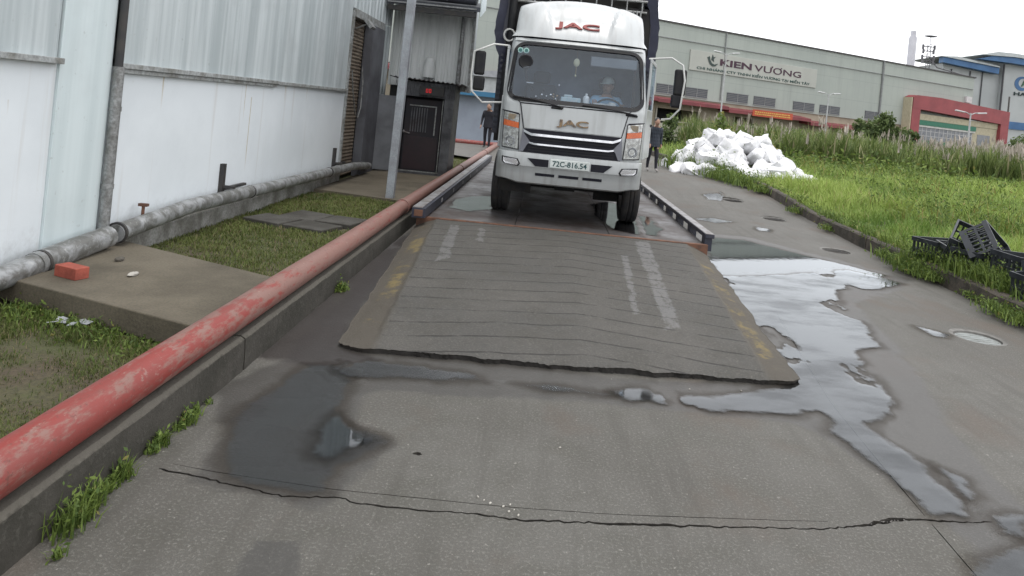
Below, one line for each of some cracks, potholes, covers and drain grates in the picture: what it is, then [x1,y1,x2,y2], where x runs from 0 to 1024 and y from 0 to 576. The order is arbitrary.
manhole cover [948,328,1008,346]
crack [159,468,990,530]
